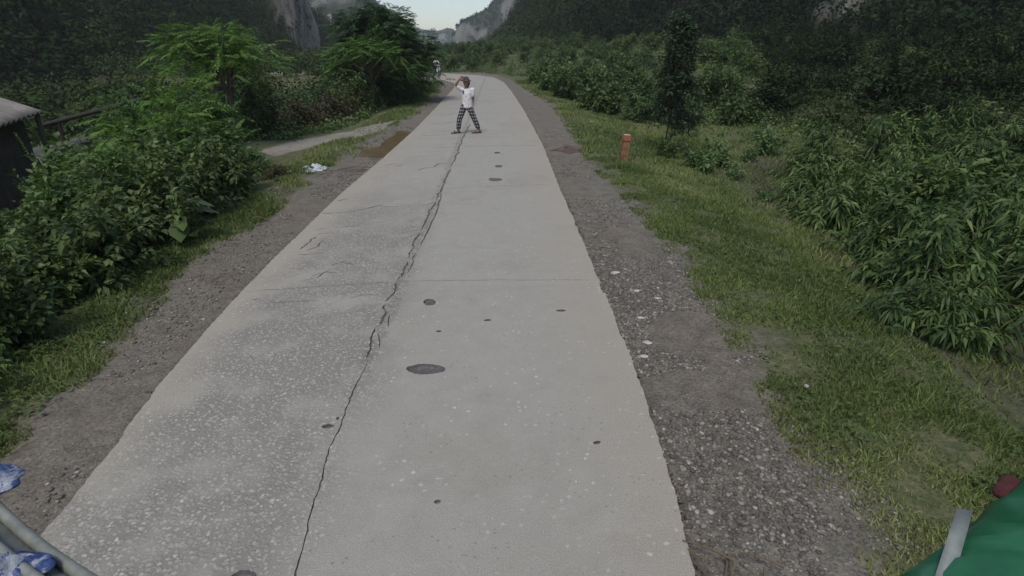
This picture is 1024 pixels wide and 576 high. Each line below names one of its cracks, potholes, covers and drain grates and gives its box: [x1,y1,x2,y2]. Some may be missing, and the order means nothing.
pothole [406,364,445,375]
crack [249,114,546,576]
